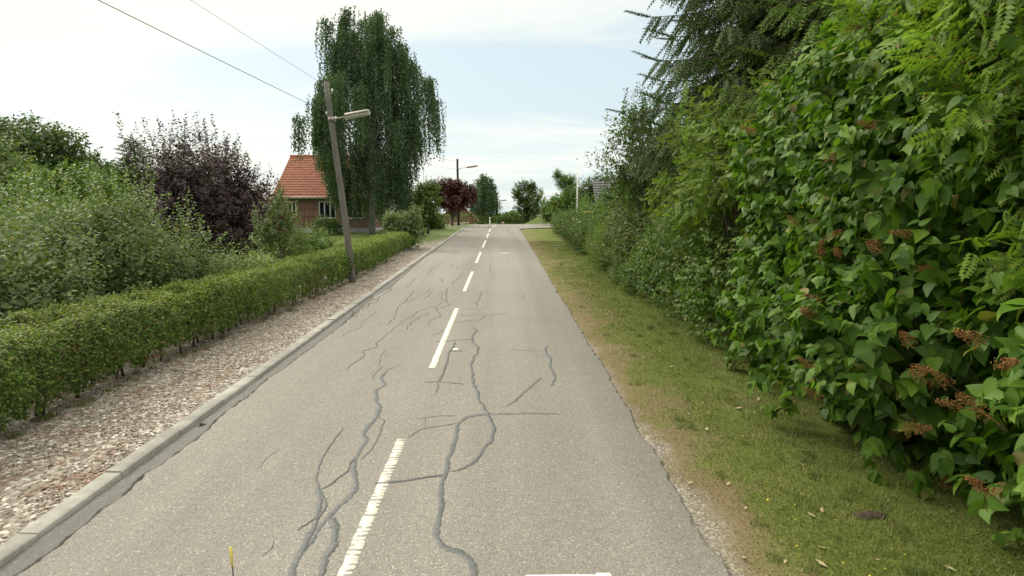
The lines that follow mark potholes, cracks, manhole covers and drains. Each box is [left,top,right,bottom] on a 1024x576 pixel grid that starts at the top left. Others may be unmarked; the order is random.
crack [36,273,407,563]
